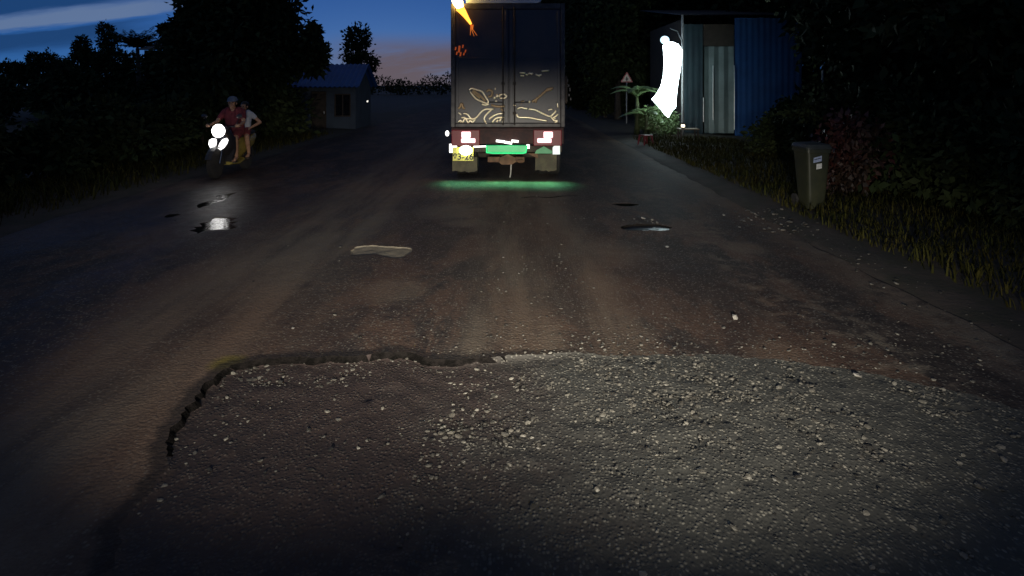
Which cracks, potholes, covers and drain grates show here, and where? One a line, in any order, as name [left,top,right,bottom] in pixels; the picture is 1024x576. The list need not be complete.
pothole [103,351,1024,576]
